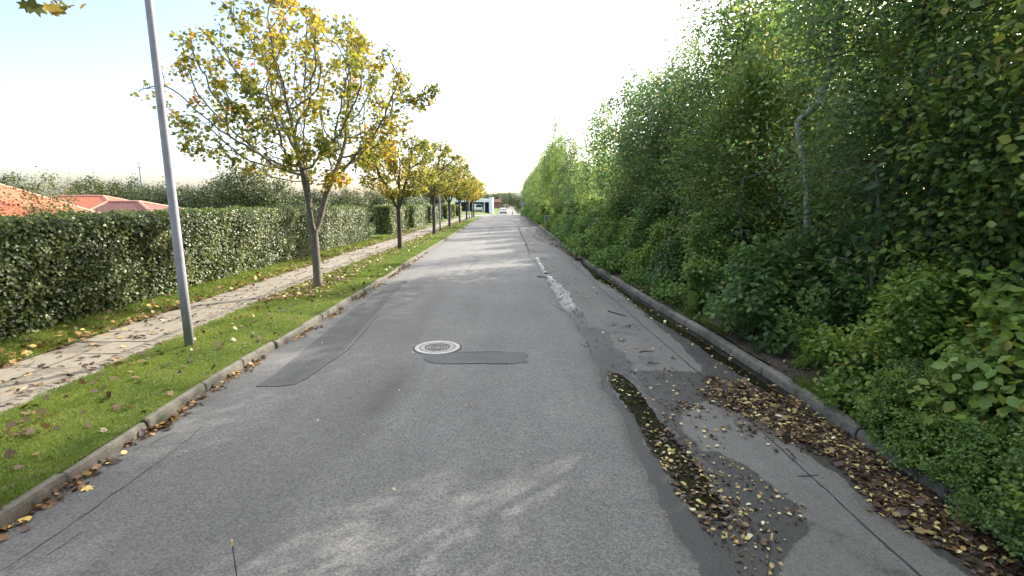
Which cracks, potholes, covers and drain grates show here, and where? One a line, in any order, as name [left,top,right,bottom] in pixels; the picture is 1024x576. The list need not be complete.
manhole cover [413,341,462,355]
pothole [605,370,735,521]
